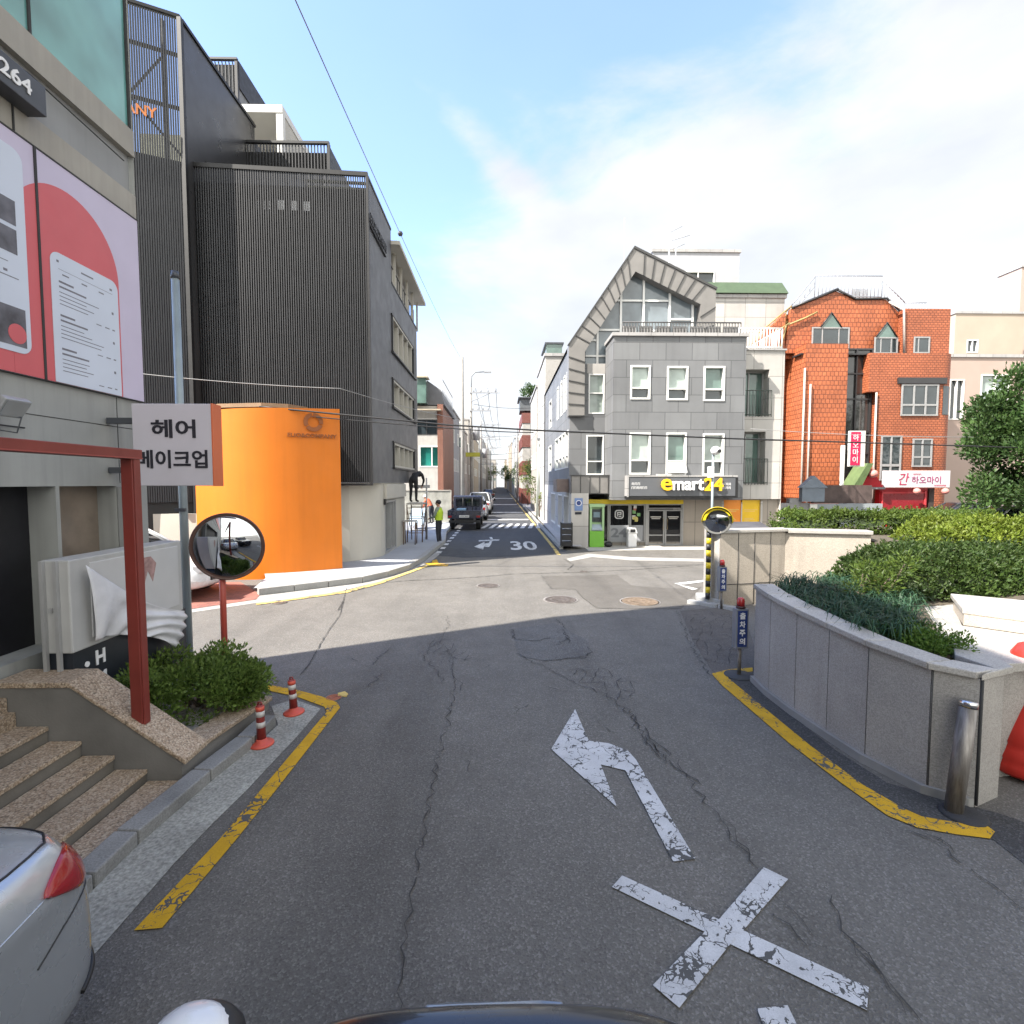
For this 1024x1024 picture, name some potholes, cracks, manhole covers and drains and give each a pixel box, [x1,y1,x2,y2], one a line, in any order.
crack [300,588,347,675]
crack [773,895,921,1020]
manhole cover [543,596,578,604]
crack [397,617,489,1009]
manhole cover [620,597,661,606]
crack [906,829,1023,908]
crack [512,578,593,661]
